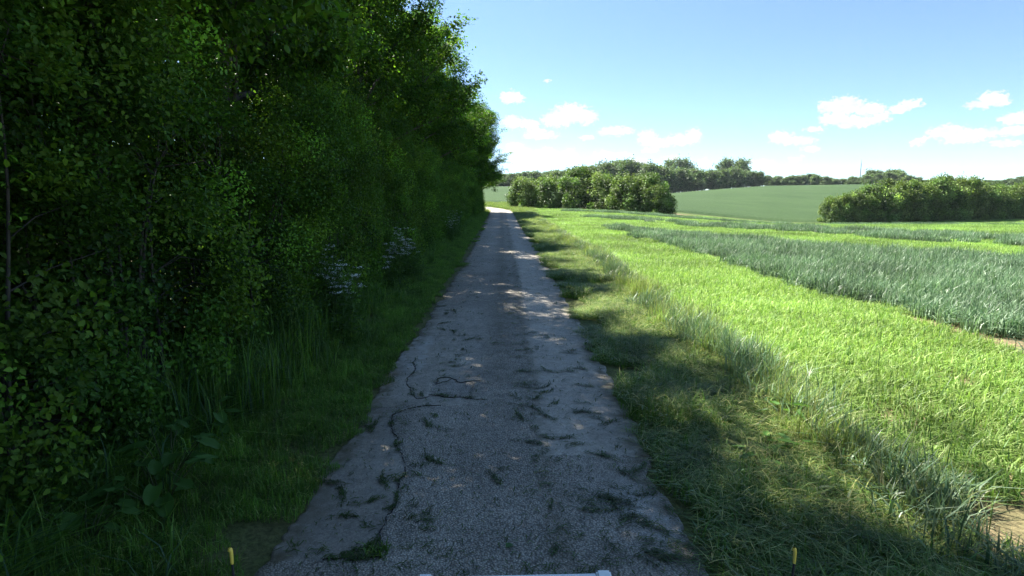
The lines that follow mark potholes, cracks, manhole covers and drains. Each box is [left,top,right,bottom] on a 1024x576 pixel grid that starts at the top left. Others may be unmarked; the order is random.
crack [379,360,485,539]
